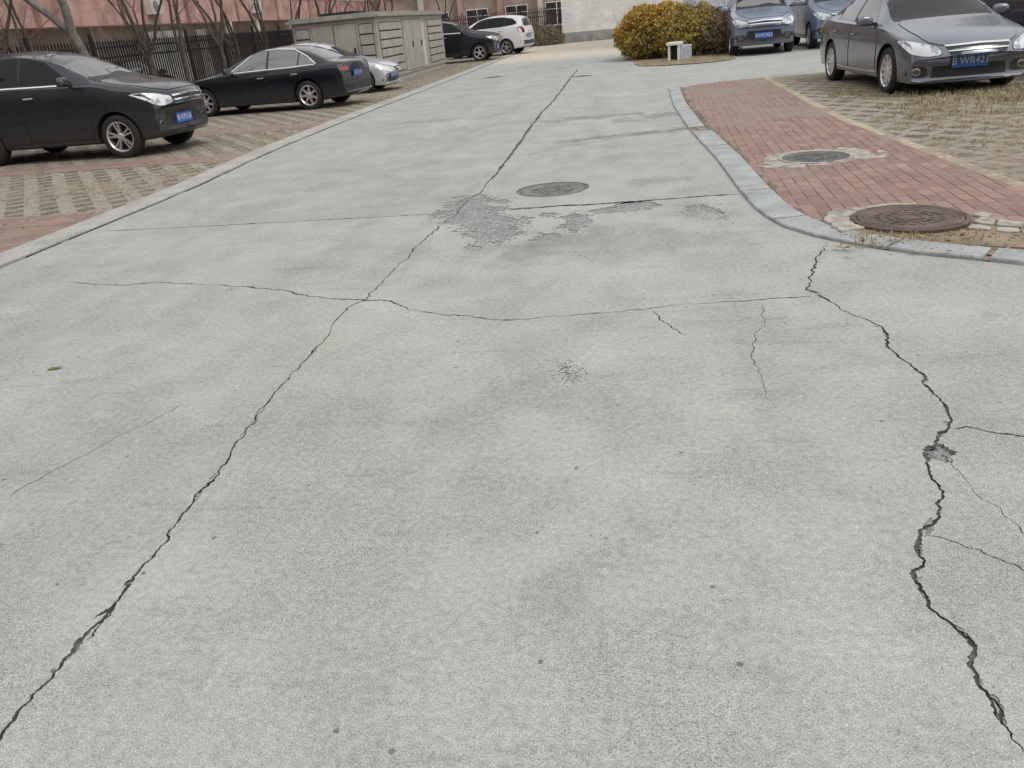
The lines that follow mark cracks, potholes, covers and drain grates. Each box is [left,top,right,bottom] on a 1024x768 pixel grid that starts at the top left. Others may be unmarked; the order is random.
crack [50,281,810,335]
crack [111,194,733,231]
crack [750,308,769,400]
manhole cover [517,182,589,197]
crack [0,71,591,740]
crack [805,244,1024,752]
manhole cover [757,147,890,169]
manhole cover [823,202,1024,235]
